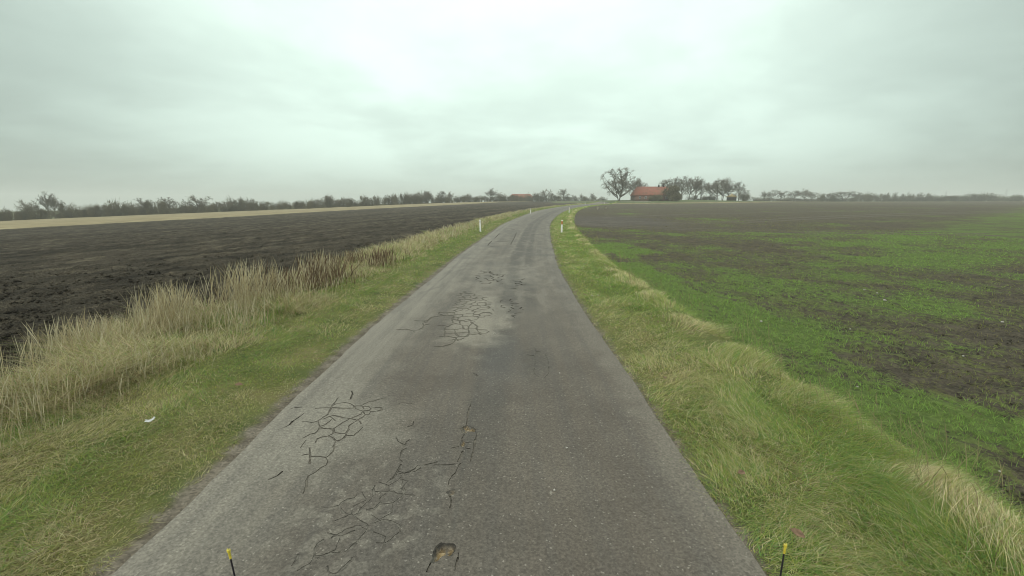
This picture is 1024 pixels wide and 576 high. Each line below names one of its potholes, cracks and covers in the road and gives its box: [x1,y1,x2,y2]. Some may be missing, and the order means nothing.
pothole [431,542,456,564]
crack [397,271,525,347]
